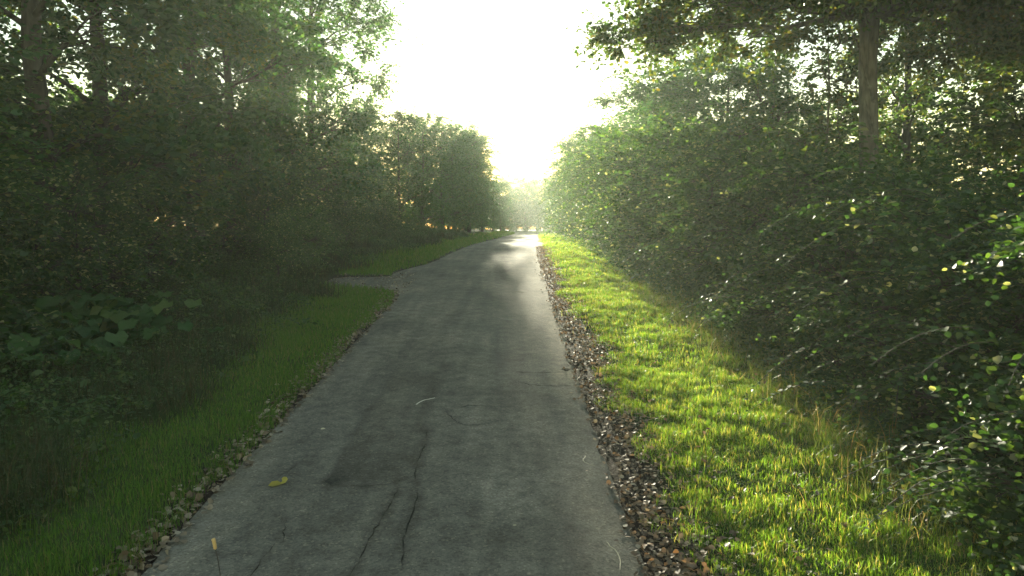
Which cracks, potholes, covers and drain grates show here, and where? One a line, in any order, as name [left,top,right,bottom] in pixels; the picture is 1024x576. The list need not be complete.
crack [329,432,428,574]
